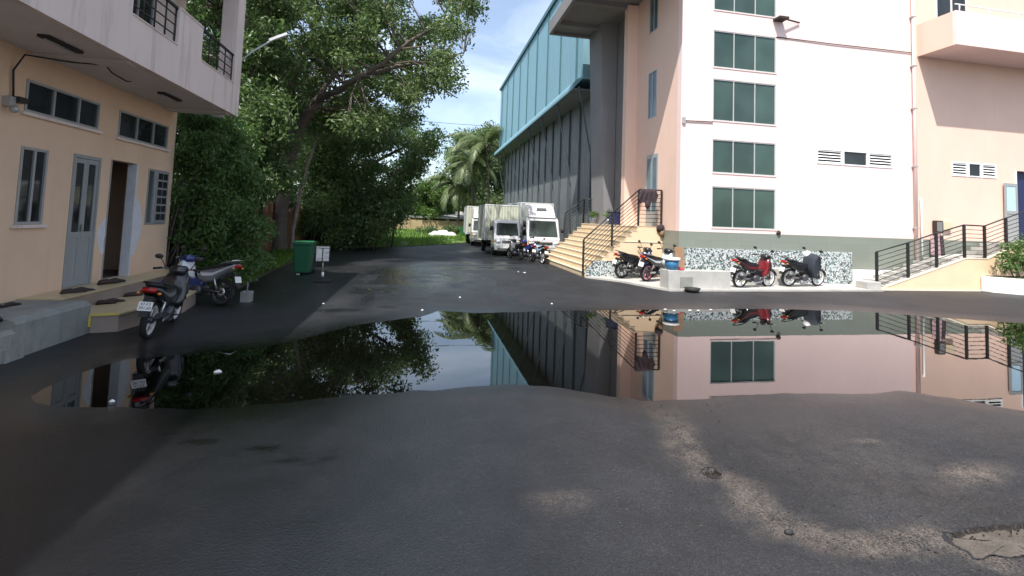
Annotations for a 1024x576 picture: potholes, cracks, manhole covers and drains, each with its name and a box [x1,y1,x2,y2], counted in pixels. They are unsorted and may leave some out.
pothole [701,467,722,479]
pothole [942,522,1024,559]
